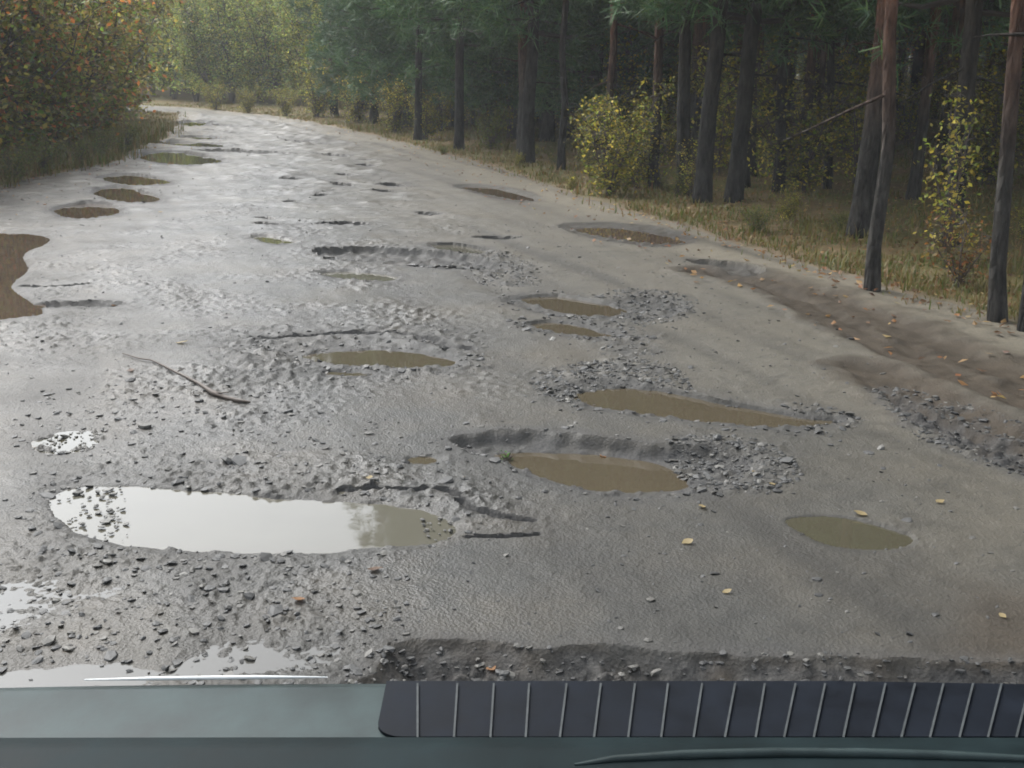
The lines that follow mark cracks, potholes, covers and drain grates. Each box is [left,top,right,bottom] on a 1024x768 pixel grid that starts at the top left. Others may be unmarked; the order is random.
pothole [0,227,57,323]
pothole [134,150,230,166]
pothole [513,319,631,339]
pothole [548,375,850,432]
pothole [500,293,692,320]
pothole [250,338,470,375]
pothole [780,514,920,554]
pothole [448,428,762,499]
pothole [48,200,128,221]
pothole [95,172,176,187]
pothole [25,476,472,562]
pothole [452,183,542,202]
